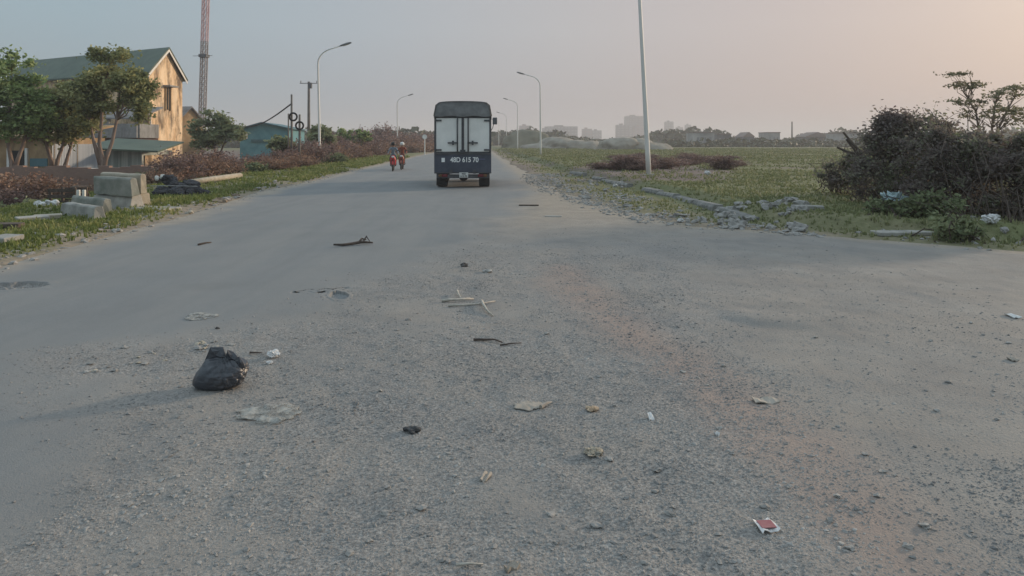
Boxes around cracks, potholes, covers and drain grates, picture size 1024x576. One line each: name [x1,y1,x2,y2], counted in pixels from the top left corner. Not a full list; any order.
pothole [325,289,354,302]
pothole [0,280,63,292]
